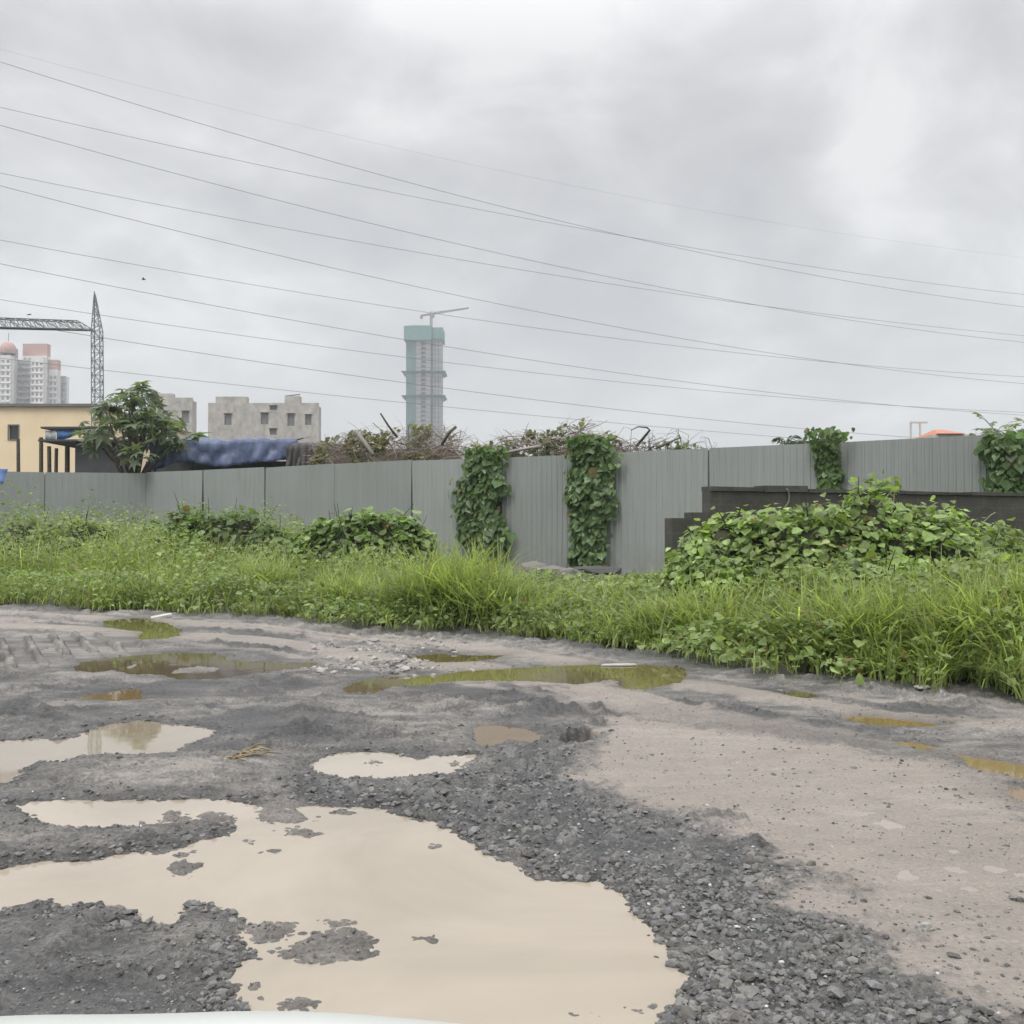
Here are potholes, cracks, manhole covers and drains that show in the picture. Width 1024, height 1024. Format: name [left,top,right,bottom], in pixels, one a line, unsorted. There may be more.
pothole [96,617,188,640]
pothole [59,684,166,702]
pothole [0,784,761,1024]
pothole [322,660,698,695]
pothole [62,650,328,681]
pothole [278,742,505,782]
pothole [936,748,1024,780]
pothole [0,714,245,790]
pothole [395,651,515,663]
pothole [454,715,560,749]
